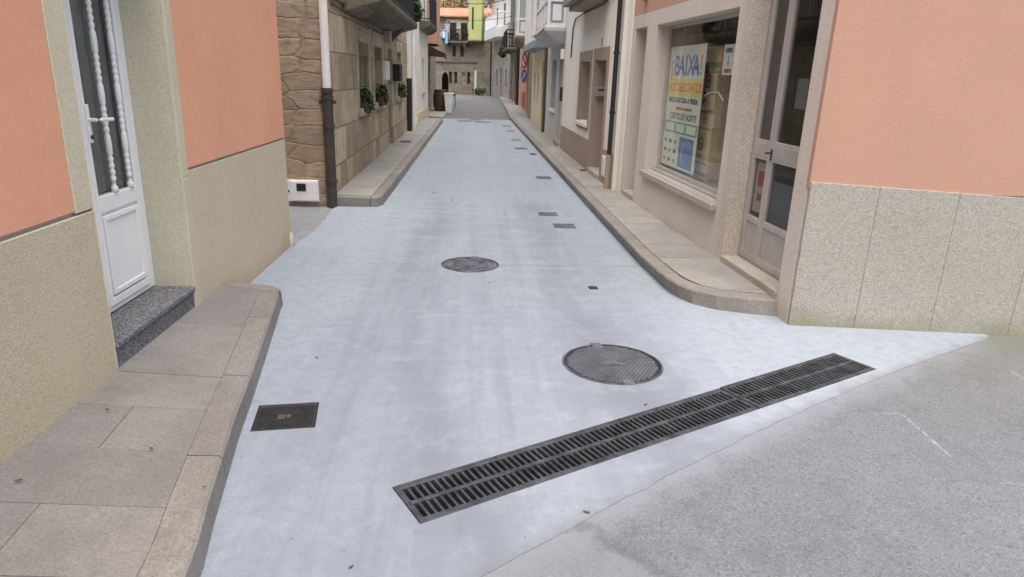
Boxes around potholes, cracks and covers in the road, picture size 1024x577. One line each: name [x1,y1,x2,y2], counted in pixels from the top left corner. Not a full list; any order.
drain grate [251,403,319,432]
drain grate [720,353,875,409]
drain grate [393,389,759,524]
manhole cover [441,256,499,273]
manhole cover [563,343,663,385]
